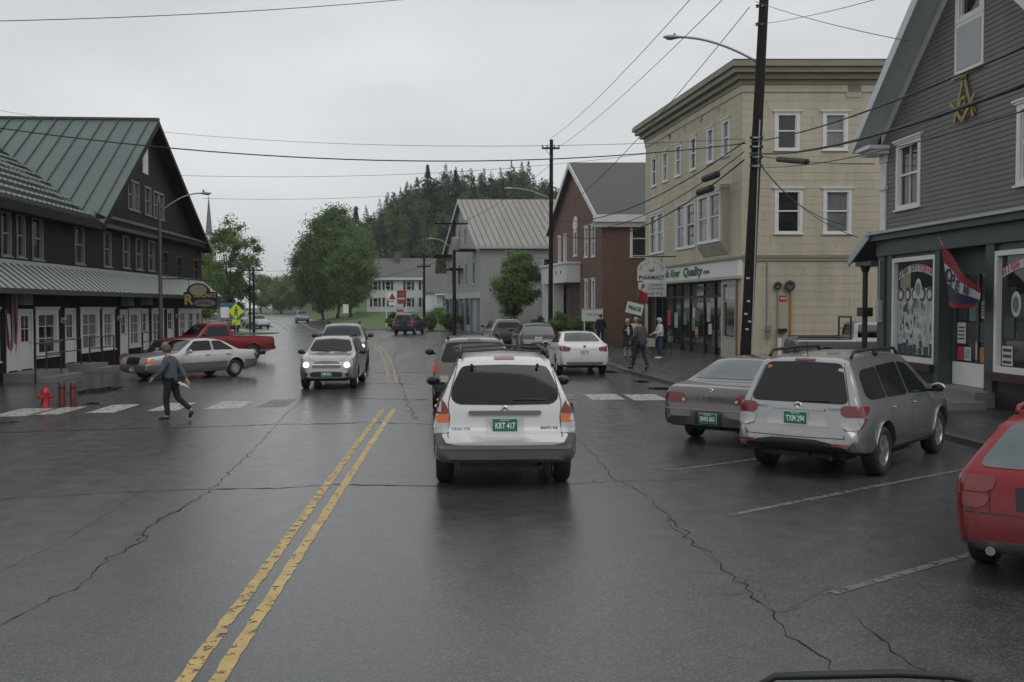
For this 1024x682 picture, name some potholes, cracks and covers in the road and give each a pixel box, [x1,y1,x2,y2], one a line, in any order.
crack [0,391,831,668]
crack [356,353,421,400]
crack [834,589,945,682]
